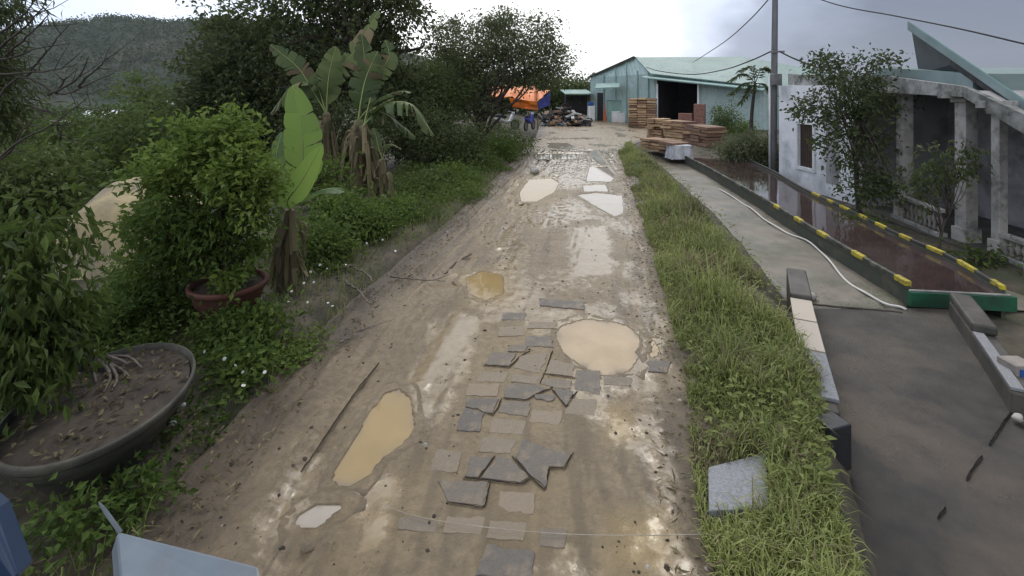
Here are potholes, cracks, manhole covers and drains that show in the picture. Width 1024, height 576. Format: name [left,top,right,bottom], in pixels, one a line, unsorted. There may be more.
pothole [452,266,515,304]
pothole [548,314,653,380]
crack [937,411,1012,519]
crack [301,363,379,473]
pothole [316,380,431,497]
